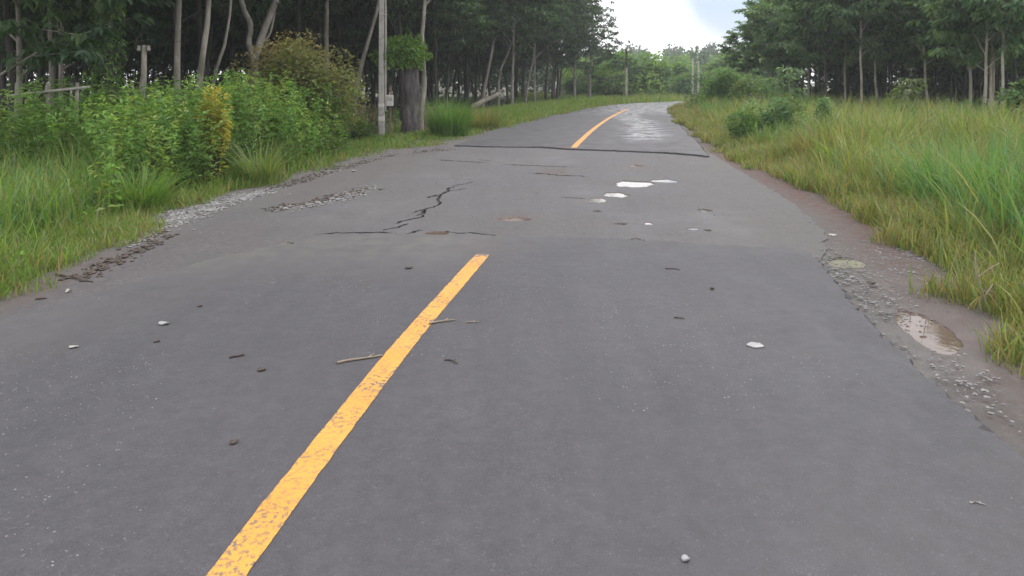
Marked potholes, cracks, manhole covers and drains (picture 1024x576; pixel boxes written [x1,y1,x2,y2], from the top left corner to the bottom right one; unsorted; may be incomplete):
crack [506,164,585,177]
crack [314,182,495,236]
pothole [895,308,964,355]
